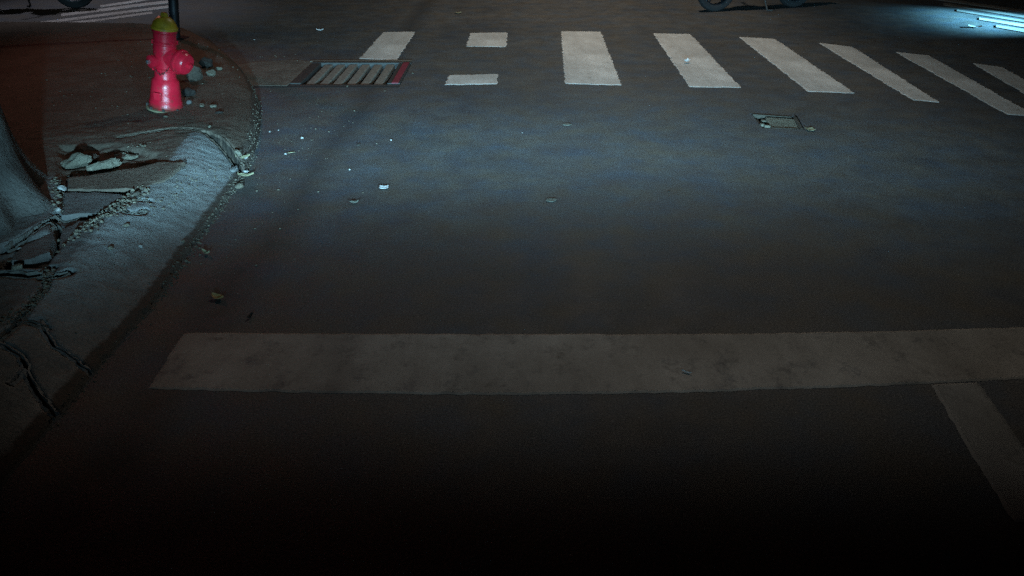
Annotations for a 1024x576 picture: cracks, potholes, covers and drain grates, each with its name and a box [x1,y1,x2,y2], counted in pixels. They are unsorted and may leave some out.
drain grate [238,60,412,88]
